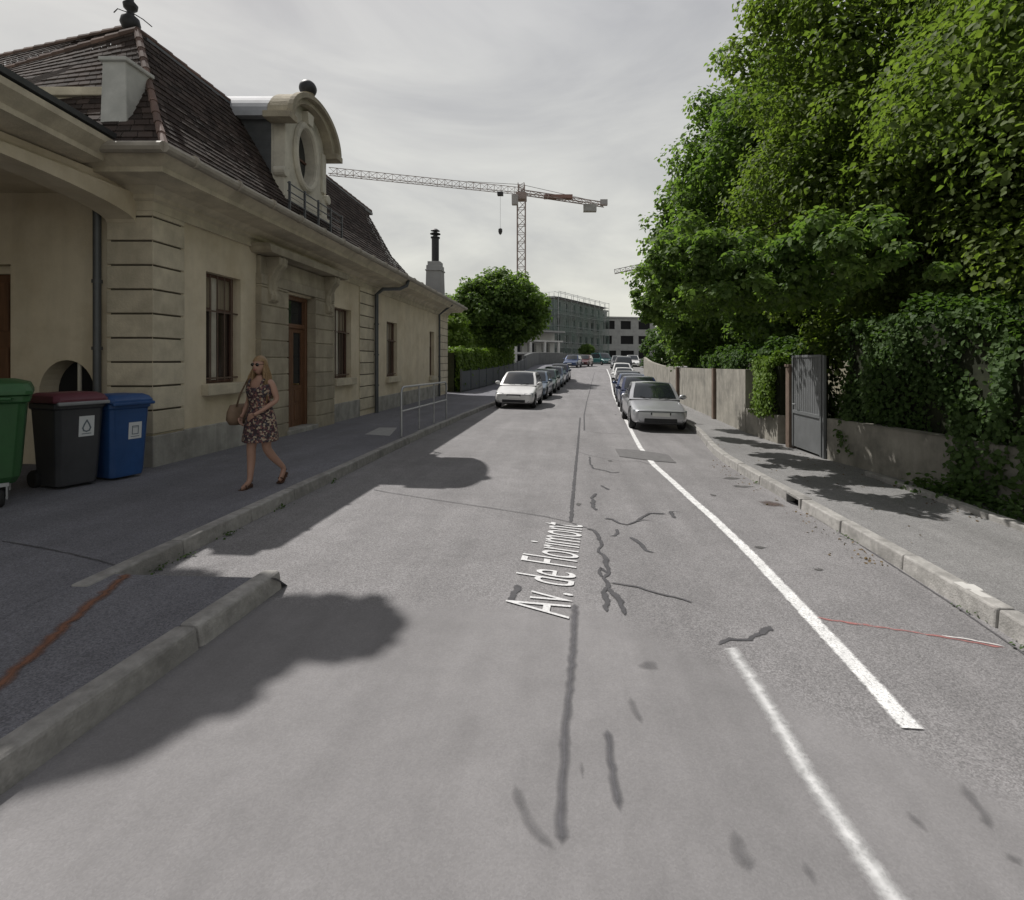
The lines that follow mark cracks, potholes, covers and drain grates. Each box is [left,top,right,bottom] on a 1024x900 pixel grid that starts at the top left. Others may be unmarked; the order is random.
drain grate [785,490,812,509]
crack [515,788,545,839]
crack [583,453,692,614]
